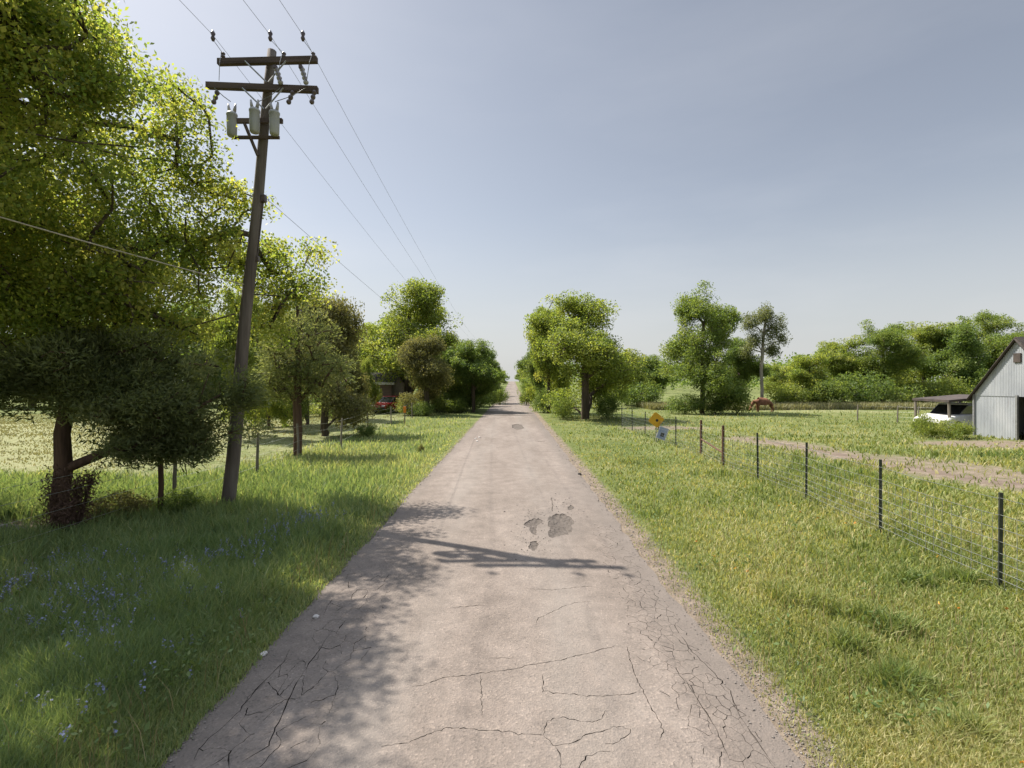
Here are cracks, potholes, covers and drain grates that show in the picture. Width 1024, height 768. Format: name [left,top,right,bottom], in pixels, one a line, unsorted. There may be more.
crack [385,710,631,768]
pothole [524,518,542,535]
pothole [548,513,574,538]
crack [593,526,775,768]
crack [194,573,397,768]
crack [418,646,664,738]
